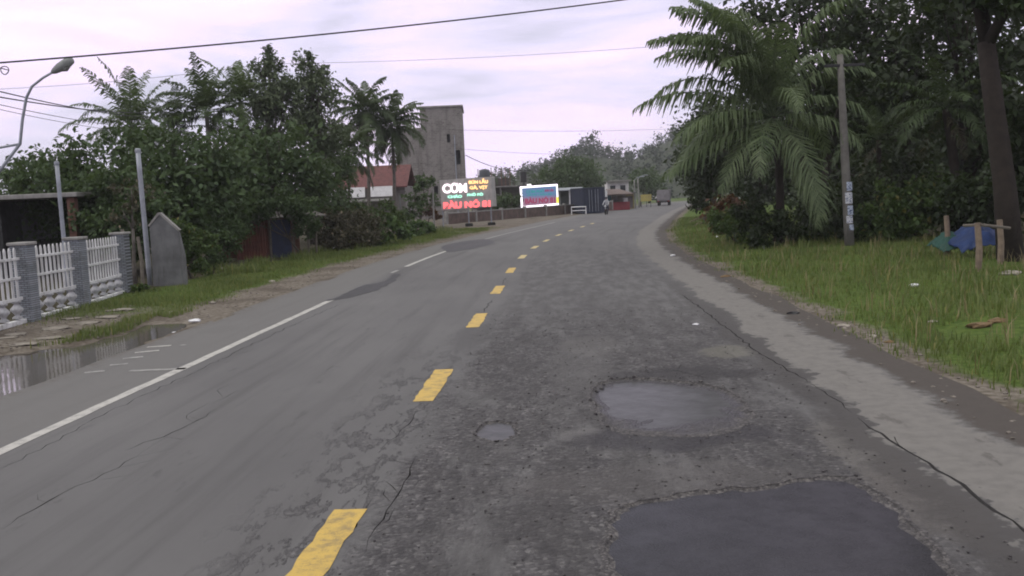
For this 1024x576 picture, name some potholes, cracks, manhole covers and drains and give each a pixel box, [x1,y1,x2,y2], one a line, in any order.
crack [3,385,231,529]
pothole [586,375,762,439]
crack [3,306,336,468]
crack [351,412,429,549]
pothole [471,419,522,442]
